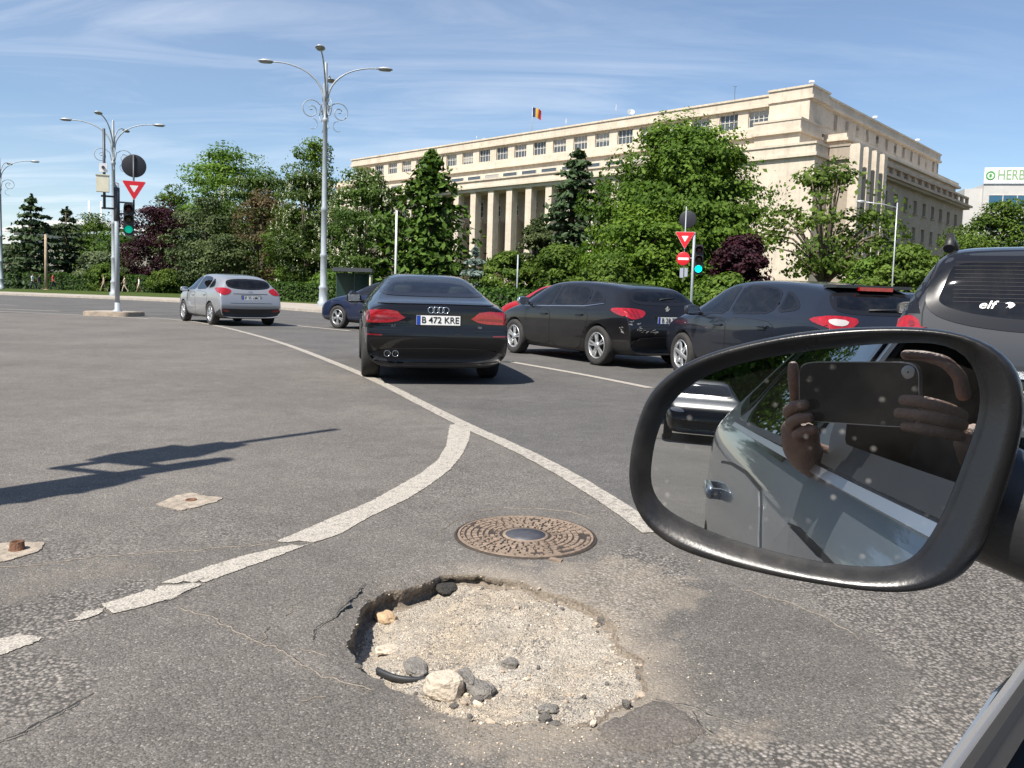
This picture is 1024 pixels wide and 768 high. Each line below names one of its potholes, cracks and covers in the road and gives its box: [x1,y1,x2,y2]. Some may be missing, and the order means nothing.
crack [0,692,94,742]
crack [155,580,372,702]
manhole cover [454,515,597,562]
pothole [345,574,649,728]
